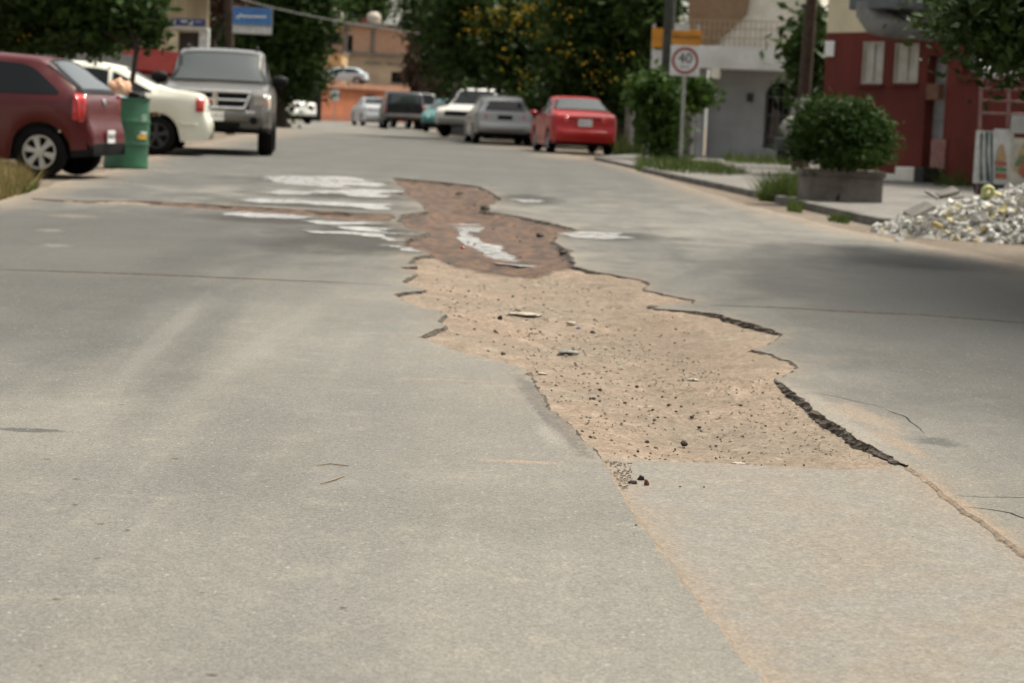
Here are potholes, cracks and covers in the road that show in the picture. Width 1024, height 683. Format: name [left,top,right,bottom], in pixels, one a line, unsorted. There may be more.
crack [969,496,1024,519]
pothole [391,178,900,474]
crack [820,393,921,430]
